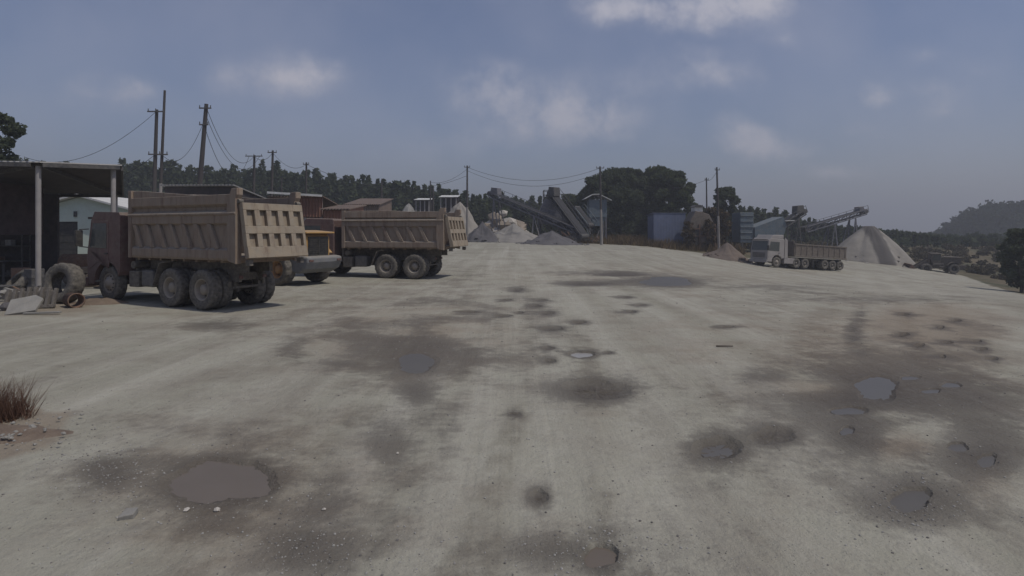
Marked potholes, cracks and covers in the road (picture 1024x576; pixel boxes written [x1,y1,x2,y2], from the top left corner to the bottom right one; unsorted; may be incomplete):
pothole [838,425,855,436]
pothole [159,456,281,505]
pothole [886,486,933,513]
pothole [568,350,596,358]
pothole [395,353,441,374]
pothole [851,374,900,403]
pothole [975,452,997,468]
pothole [690,434,744,459]
pothole [826,405,870,415]
pothole [529,488,549,503]
pothole [581,541,619,568]
pothole [946,441,969,452]
